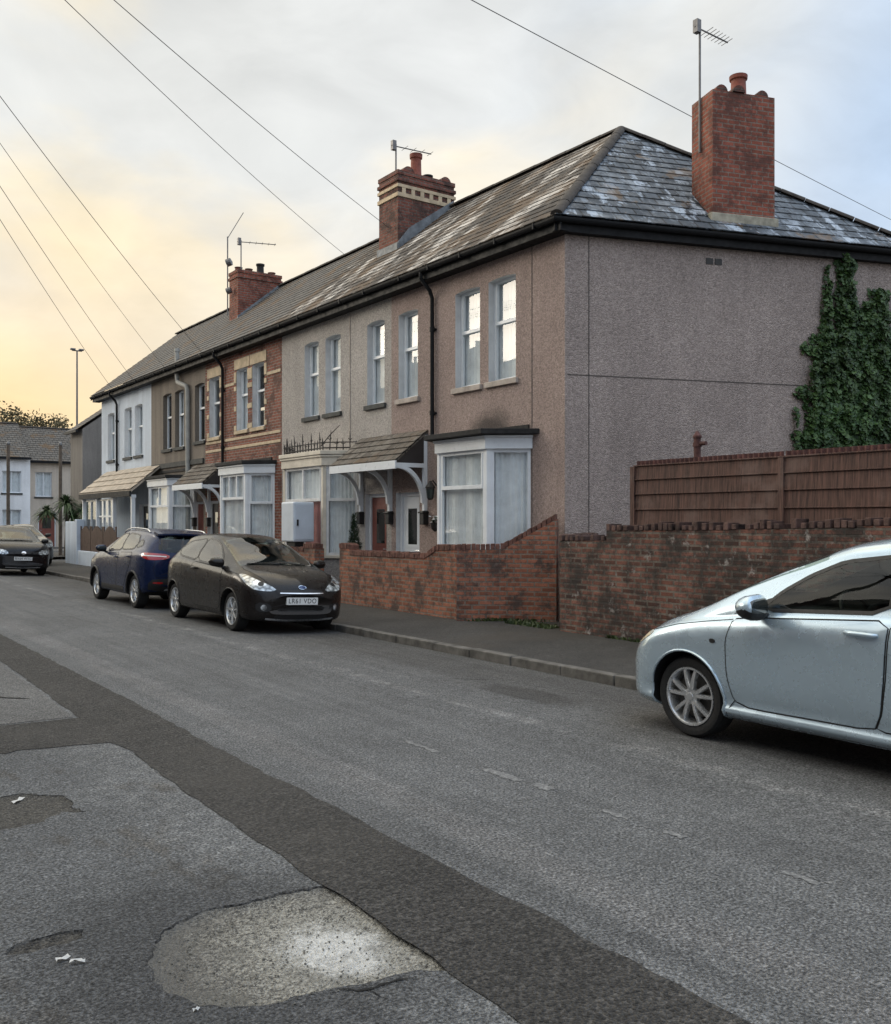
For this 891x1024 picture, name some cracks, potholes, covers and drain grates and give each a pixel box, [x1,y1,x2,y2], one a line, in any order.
pothole [0,793,86,830]
pothole [5,929,84,955]
crack [338,976,417,999]
